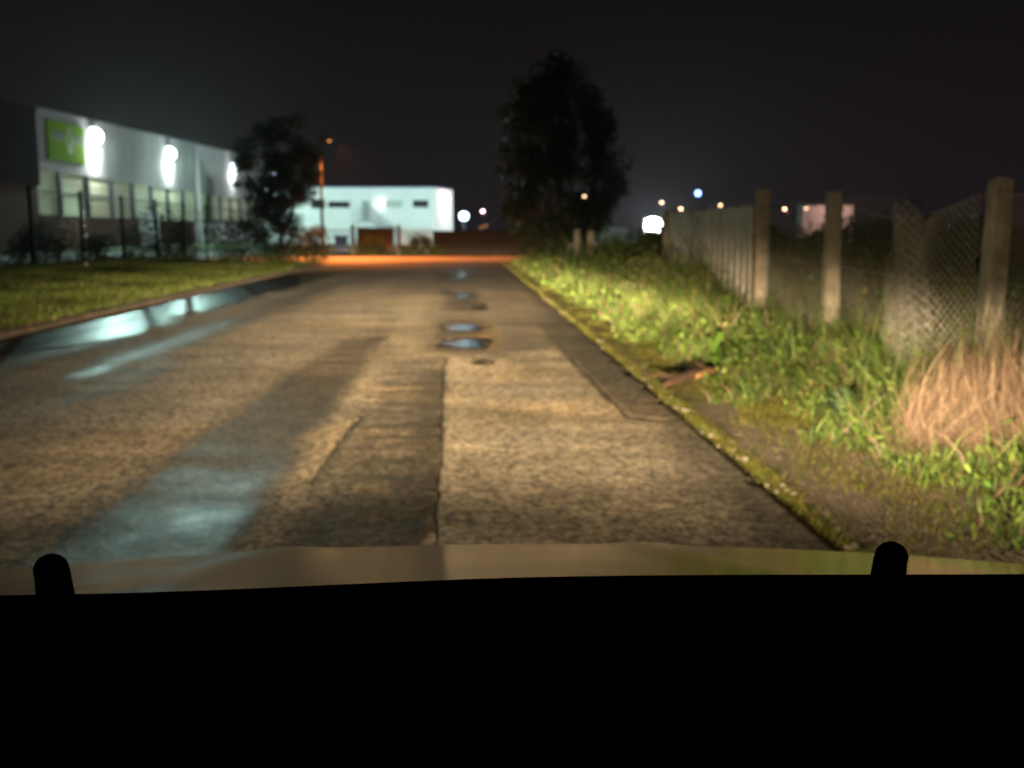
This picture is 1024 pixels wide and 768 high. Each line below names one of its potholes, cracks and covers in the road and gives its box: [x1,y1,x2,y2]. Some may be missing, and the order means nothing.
pothole [432,322,500,332]
crack [290,417,375,484]
pothole [460,355,504,368]
pothole [467,301,494,311]
pothole [429,335,503,349]
